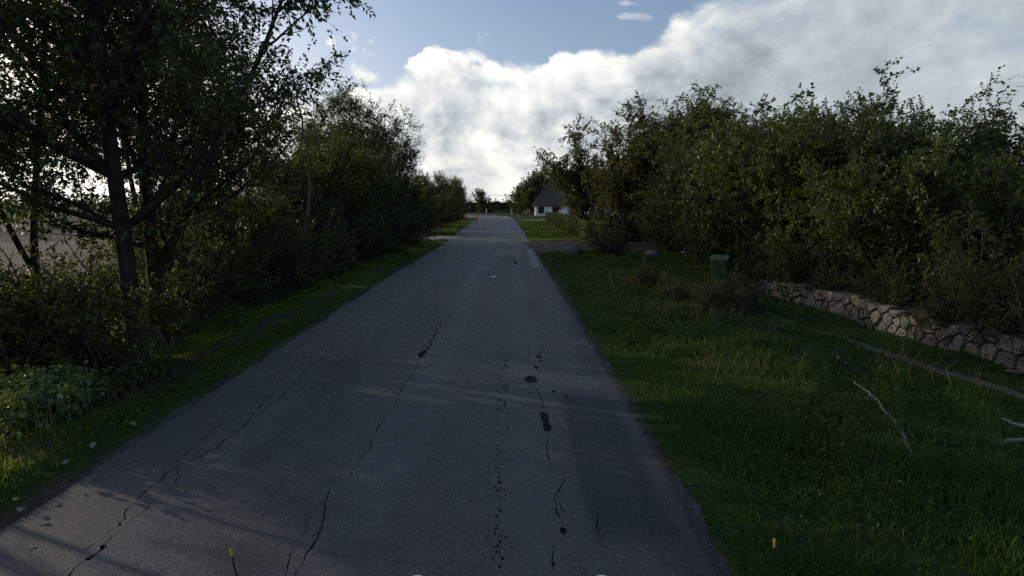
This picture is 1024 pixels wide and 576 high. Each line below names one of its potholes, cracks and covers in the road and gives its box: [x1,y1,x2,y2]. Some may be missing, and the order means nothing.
crack [285,316,450,576]
crack [543,432,568,570]
pothole [540,412,553,432]
crack [492,341,509,568]
crack [68,344,337,576]
crack [521,332,545,409]
